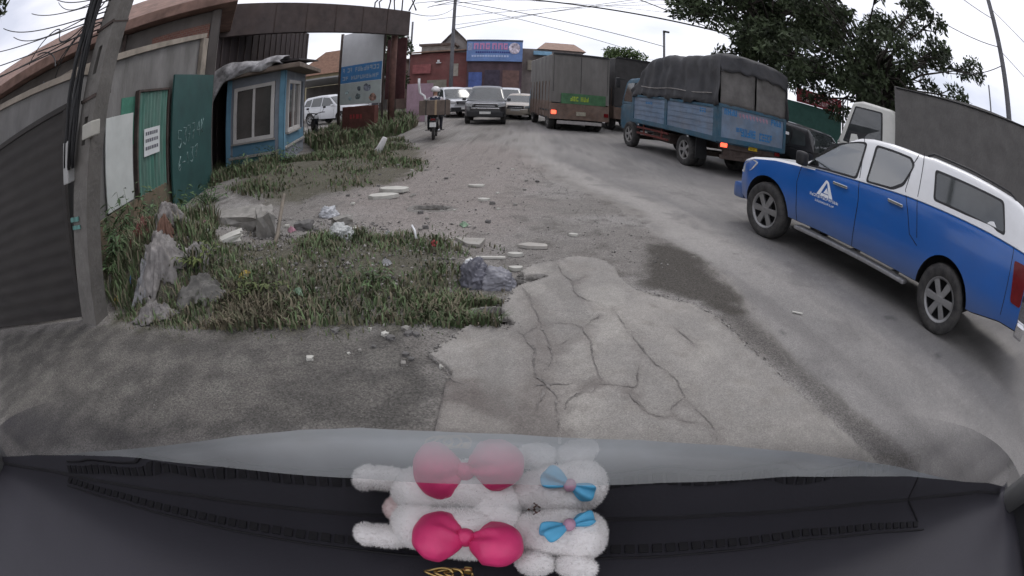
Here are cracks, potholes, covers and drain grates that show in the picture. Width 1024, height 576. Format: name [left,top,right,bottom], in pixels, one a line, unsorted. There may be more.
crack [500,263,716,432]
